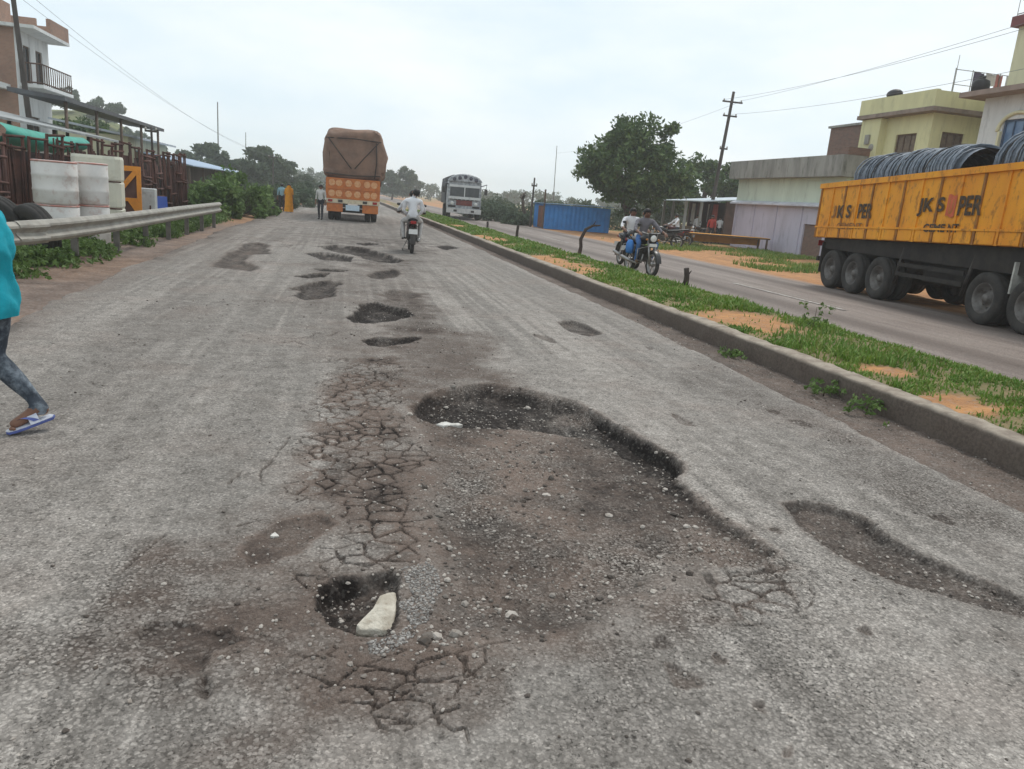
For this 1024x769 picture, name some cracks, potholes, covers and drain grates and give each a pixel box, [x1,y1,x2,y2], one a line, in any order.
crack [226,331,427,592]
pothole [360,336,423,347]
pothole [317,244,405,264]
pothole [365,269,402,279]
pothole [208,242,273,272]
pothole [305,251,356,262]
pothole [779,499,1024,619]
pothole [344,301,416,324]
pothole [311,568,405,638]
crack [294,646,488,744]
pothole [289,280,344,300]
pothole [556,320,604,337]
